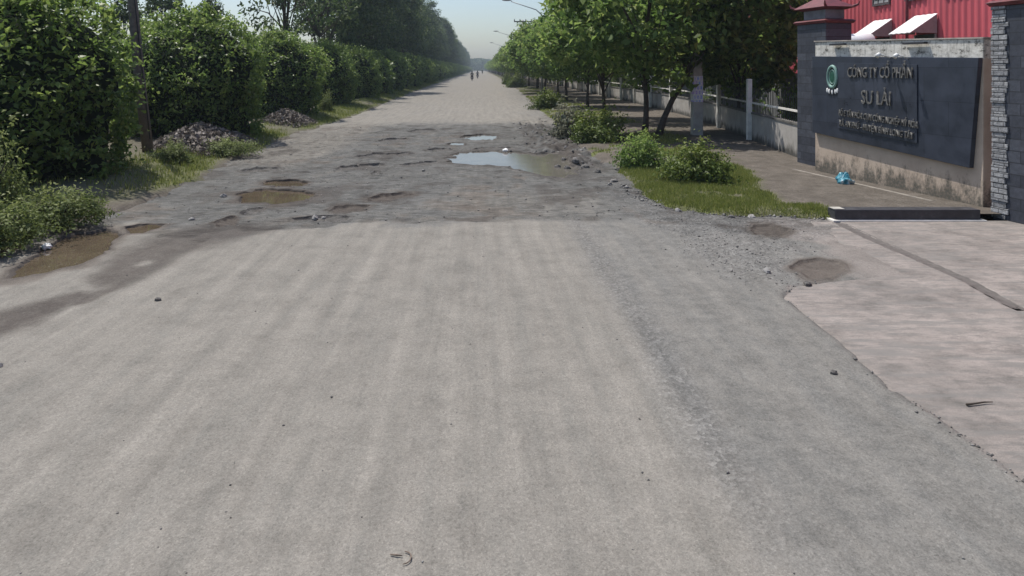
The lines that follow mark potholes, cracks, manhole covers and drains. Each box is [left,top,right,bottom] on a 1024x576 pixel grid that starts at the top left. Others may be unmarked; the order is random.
pothole [232,188,320,205]
pothole [326,204,373,214]
pothole [364,191,418,202]
pothole [0,228,125,281]
pothole [746,223,794,238]
pothole [120,223,169,235]
pothole [208,215,243,228]
pothole [458,133,502,141]
pothole [441,150,587,179]
pothole [259,179,314,187]
pothole [783,257,851,281]
